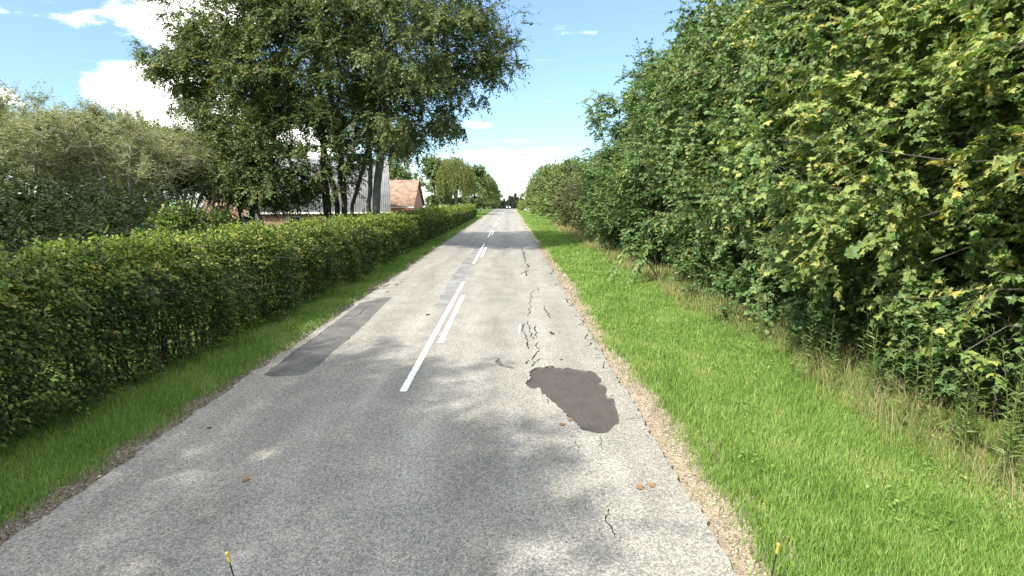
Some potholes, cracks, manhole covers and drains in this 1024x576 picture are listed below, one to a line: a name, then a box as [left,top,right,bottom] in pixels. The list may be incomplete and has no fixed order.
crack [521,248,605,368]
